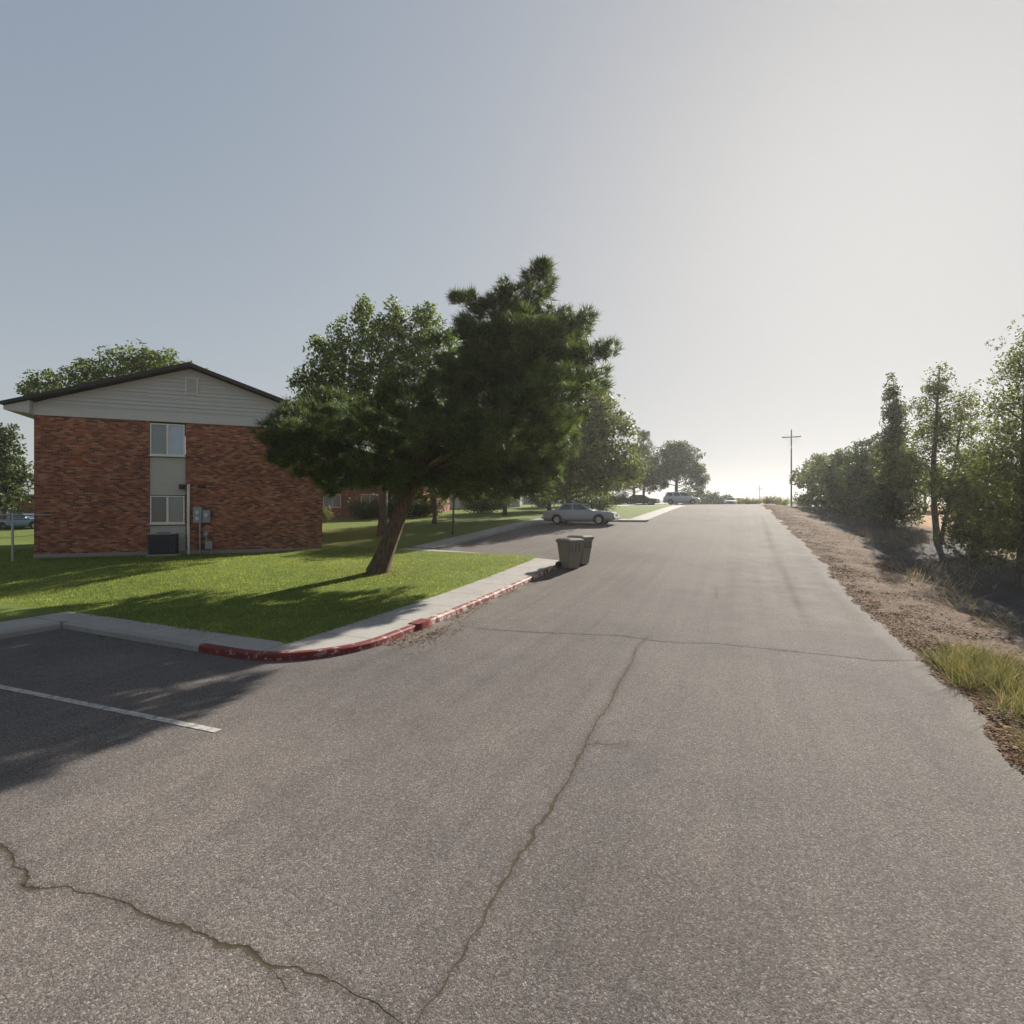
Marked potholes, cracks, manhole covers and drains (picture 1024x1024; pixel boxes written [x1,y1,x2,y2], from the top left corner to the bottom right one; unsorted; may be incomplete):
crack [0,628,909,1024]
